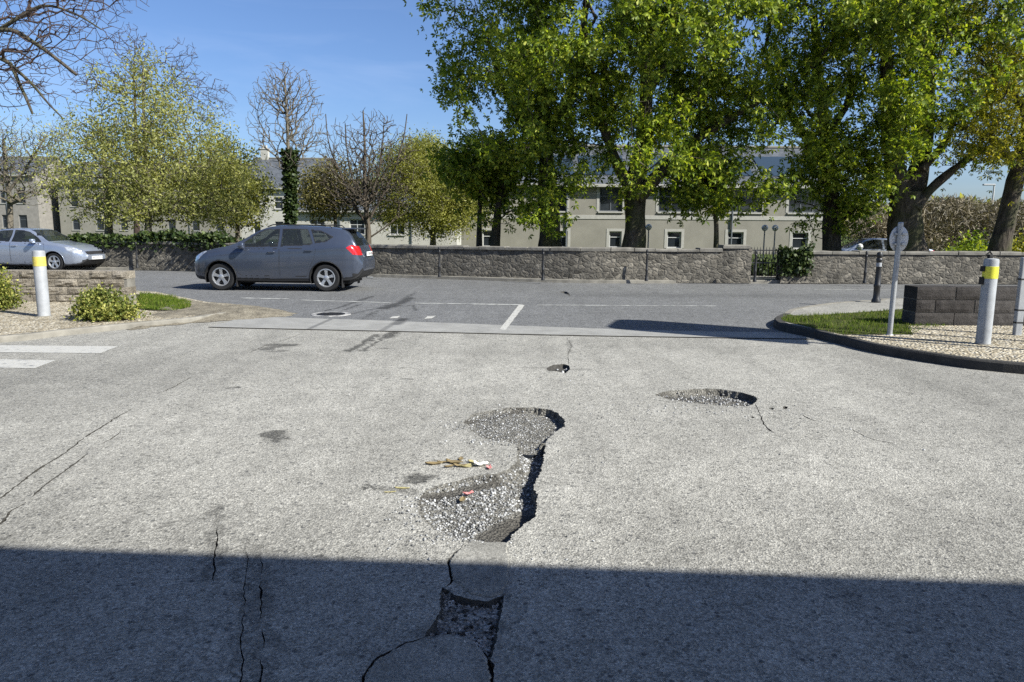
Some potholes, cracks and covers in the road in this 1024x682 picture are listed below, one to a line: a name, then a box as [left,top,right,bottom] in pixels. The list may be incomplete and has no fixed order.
pothole [655,389,757,406]
crack [0,409,131,524]
pothole [418,443,546,543]
pothole [546,364,570,373]
crack [240,554,265,682]
pothole [464,407,566,455]
pothole [425,587,504,661]
crack [362,638,495,682]
